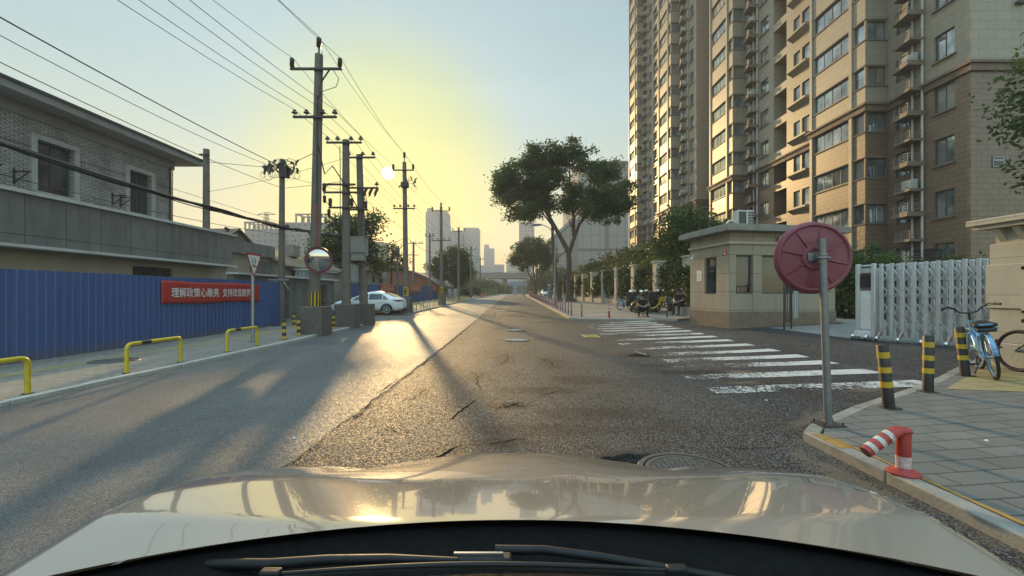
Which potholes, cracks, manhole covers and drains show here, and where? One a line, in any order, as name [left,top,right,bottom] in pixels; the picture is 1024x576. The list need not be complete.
crack [281,304,496,468]
manhole cover [637,452,731,469]
crack [448,354,574,421]
